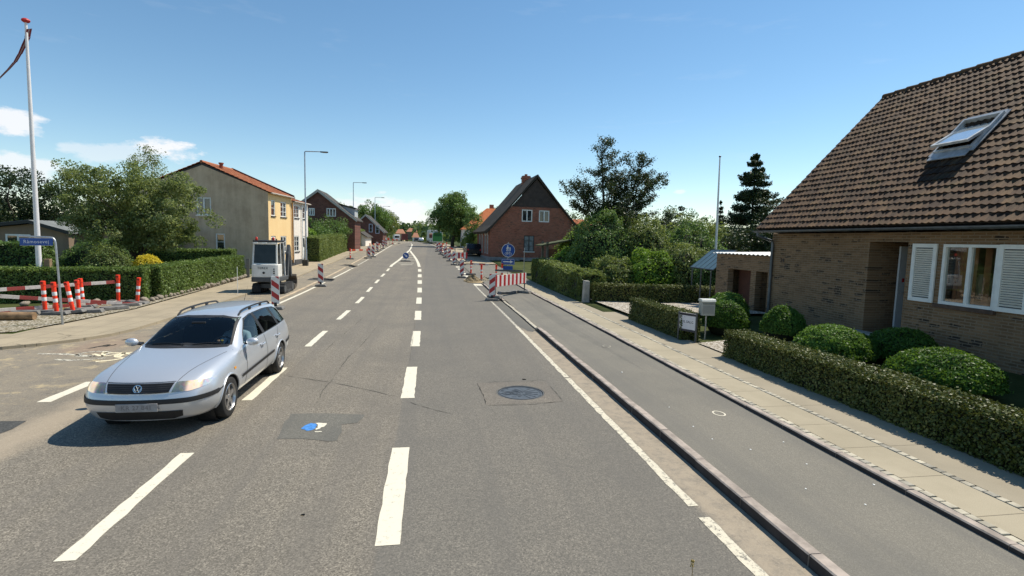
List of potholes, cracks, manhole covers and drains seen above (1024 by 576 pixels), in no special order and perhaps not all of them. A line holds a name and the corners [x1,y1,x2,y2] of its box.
manhole cover [496,386,544,400]
